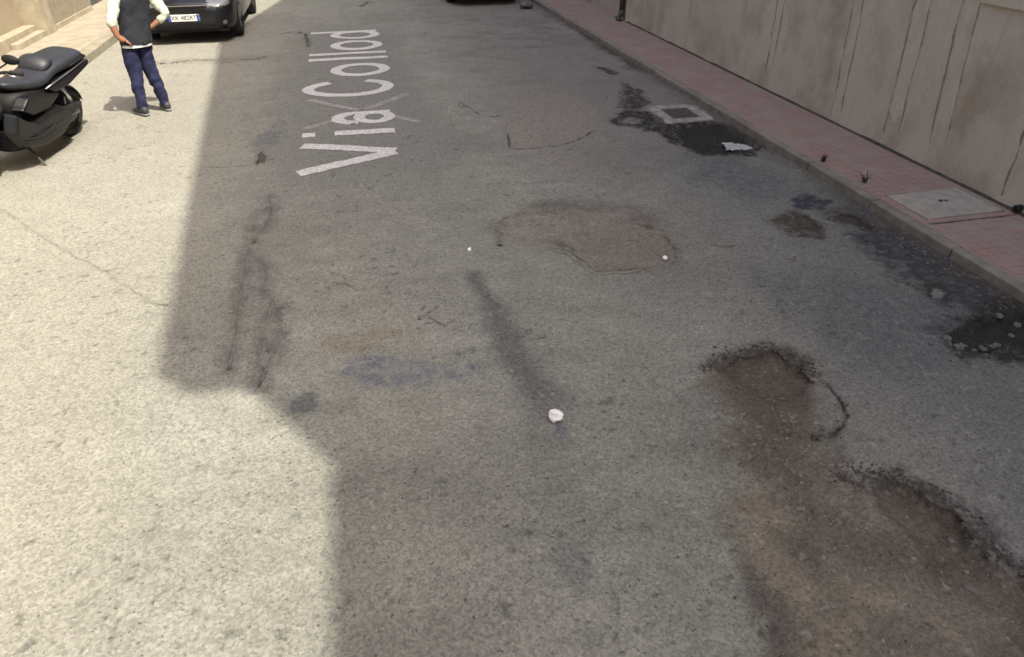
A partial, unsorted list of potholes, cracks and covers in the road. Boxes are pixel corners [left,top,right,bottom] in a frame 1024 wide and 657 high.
pothole [935,309,1024,356]
crack [0,208,168,305]
crack [457,101,595,151]
pothole [711,346,827,424]
crack [225,196,284,387]
pothole [848,471,1024,657]
manhole cover [886,188,1016,224]
